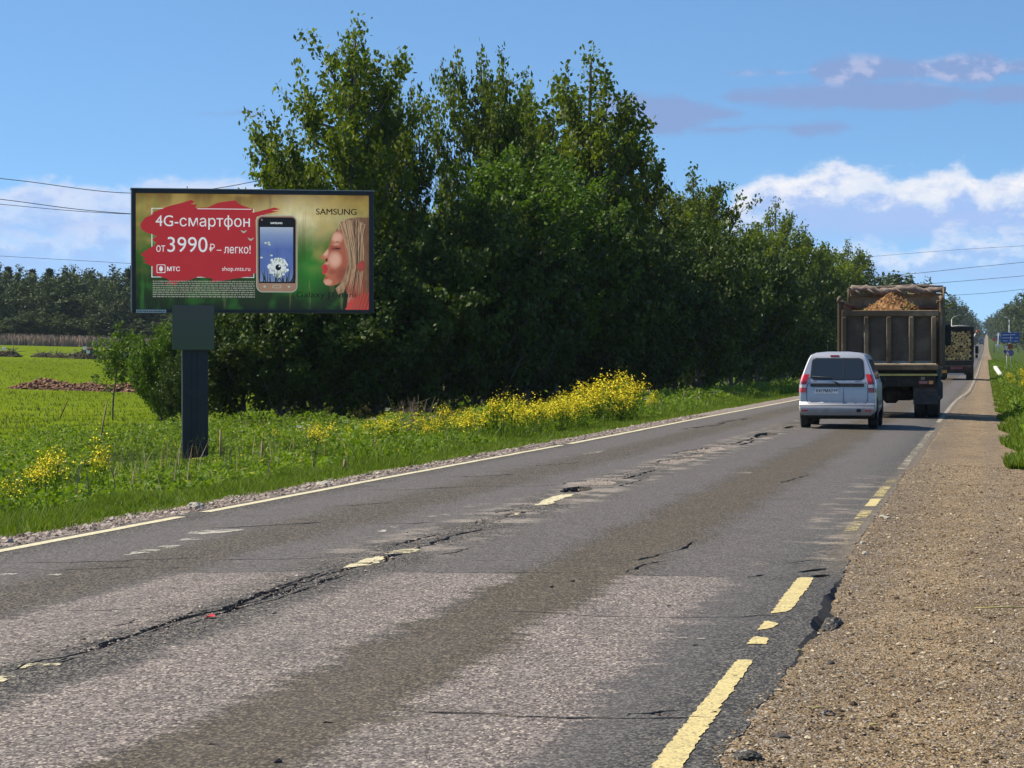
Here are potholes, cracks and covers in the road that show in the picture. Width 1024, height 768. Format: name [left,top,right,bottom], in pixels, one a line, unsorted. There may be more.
crack [405,710,716,719]
crack [623,541,695,573]
crack [3,557,373,674]
